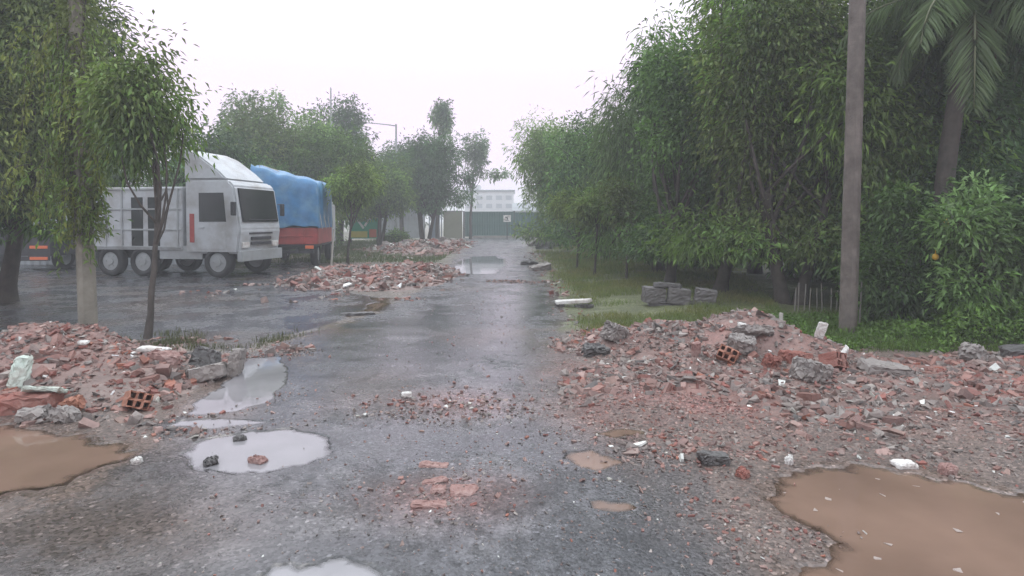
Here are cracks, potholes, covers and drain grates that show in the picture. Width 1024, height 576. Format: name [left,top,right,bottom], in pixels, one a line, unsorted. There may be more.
pothole [589,498,639,512]
pothole [178,428,337,475]
pothole [0,422,142,498]
pothole [453,256,508,274]
pothole [562,449,624,471]
pothole [185,356,289,415]
pothole [254,555,393,576]
pothole [755,461,1024,576]
